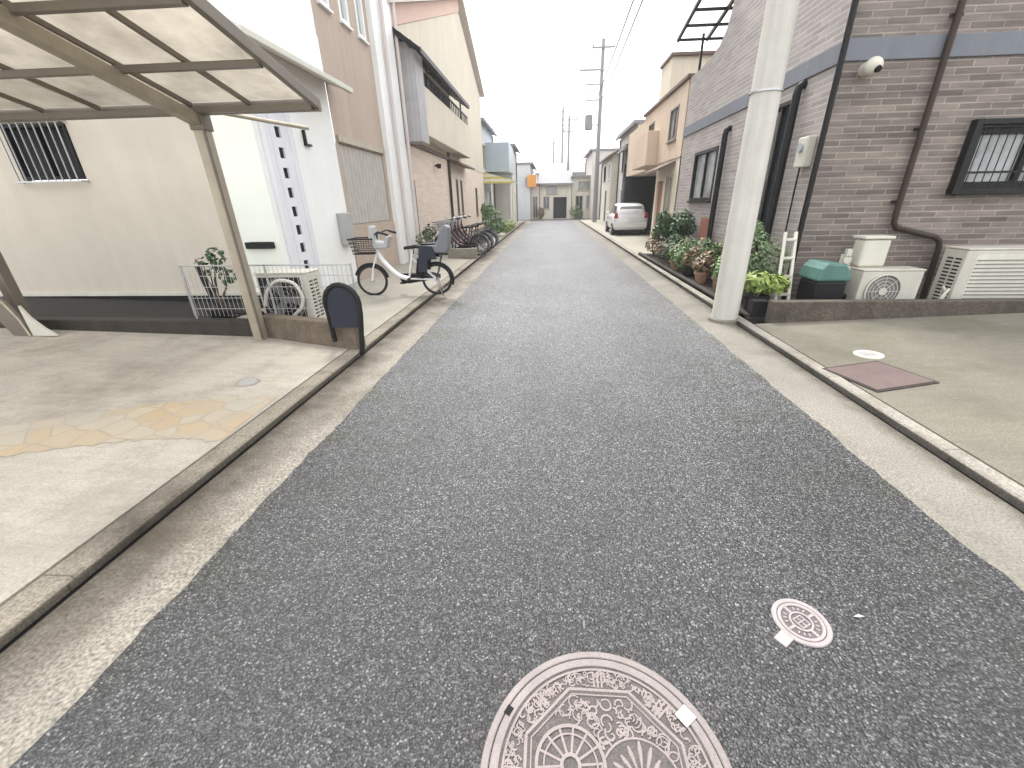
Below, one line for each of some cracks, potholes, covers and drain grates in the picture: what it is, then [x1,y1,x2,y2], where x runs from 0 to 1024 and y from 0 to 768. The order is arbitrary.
utility cover [771,598,833,648]
manhole cover [480,652,732,768]
manhole cover [822,361,940,393]
